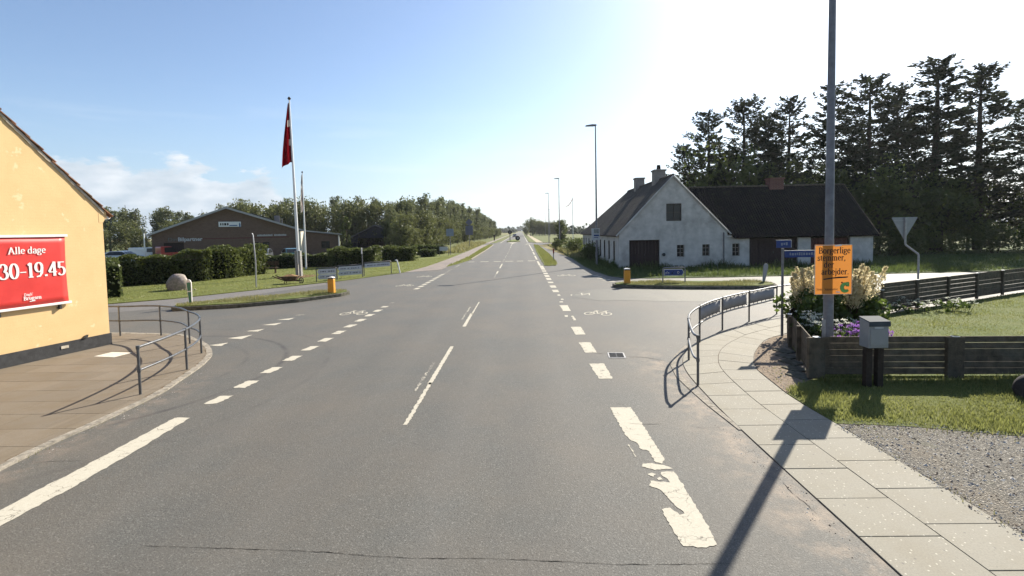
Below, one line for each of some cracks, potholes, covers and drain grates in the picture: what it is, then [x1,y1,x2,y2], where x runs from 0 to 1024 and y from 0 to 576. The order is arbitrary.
crack [156,546,731,565]
